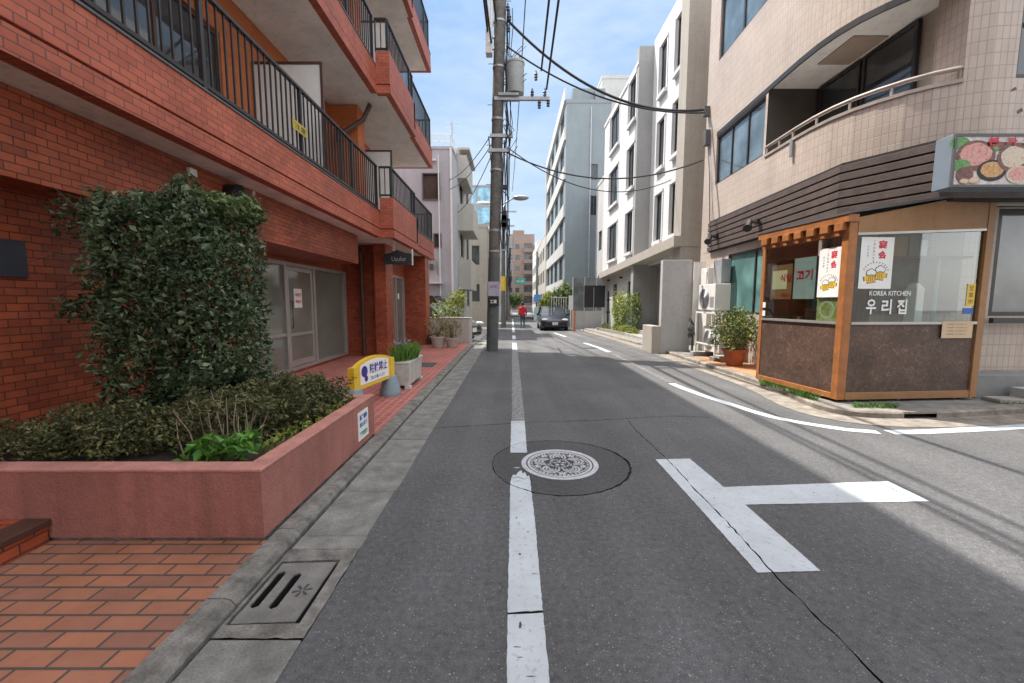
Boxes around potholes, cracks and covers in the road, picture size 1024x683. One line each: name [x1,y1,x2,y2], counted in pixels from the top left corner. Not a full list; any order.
crack [442,416,884,683]
drain grate [211,549,359,643]
manhole cover [521,449,599,480]
